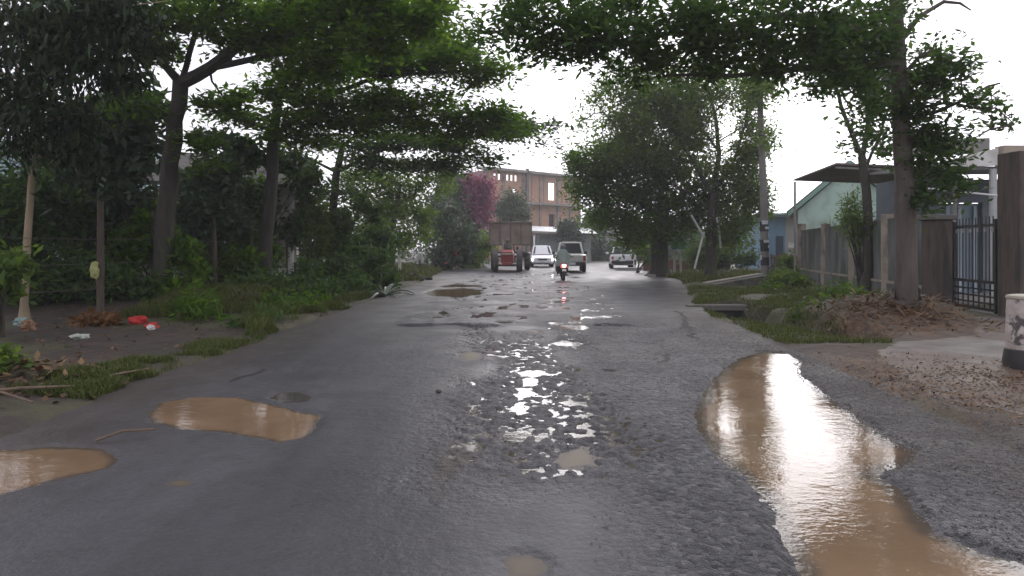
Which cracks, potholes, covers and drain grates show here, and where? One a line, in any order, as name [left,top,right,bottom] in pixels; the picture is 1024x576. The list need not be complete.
pothole [0,443,130,496]
pothole [455,350,485,361]
pothole [510,386,539,401]
pothole [507,399,532,415]
pothole [516,368,551,377]
pothole [545,442,601,471]
crack [230,367,265,382]
pothole [141,393,332,443]
pothole [493,428,533,444]
pothole [685,350,1024,576]
pothole [263,390,318,405]
pothole [422,287,485,297]
